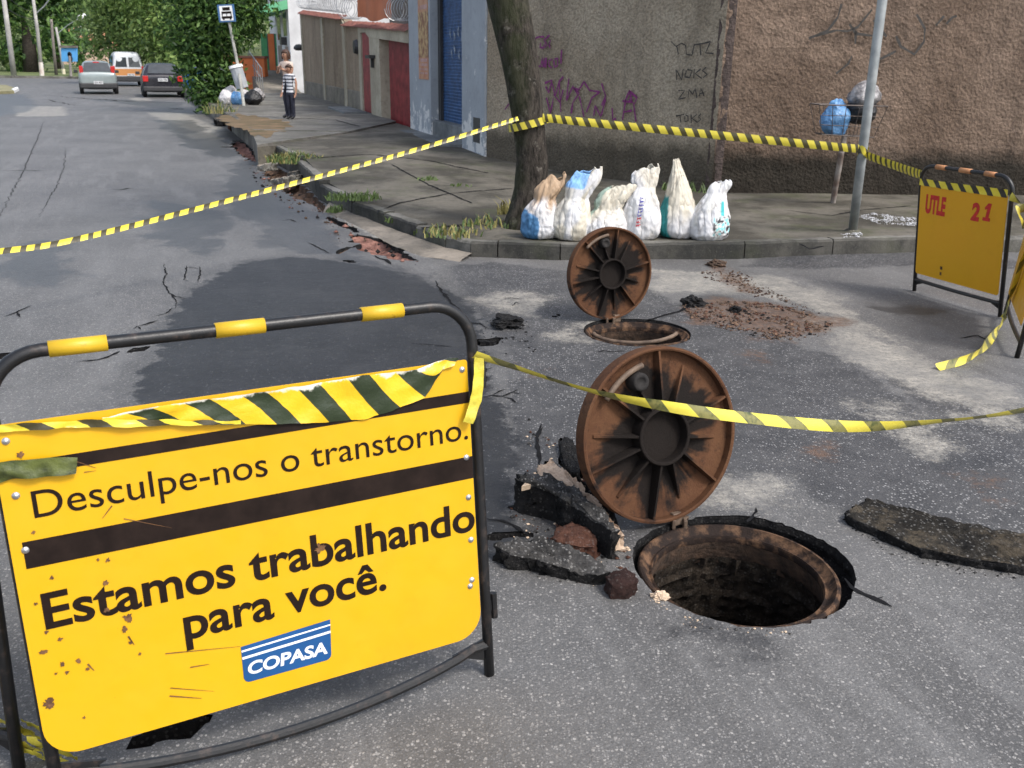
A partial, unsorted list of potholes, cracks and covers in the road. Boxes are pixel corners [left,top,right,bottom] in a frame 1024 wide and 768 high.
manhole cover [567,227,691,346]
pothole [326,217,359,242]
pothole [228,141,255,161]
pothole [262,168,325,212]
pothole [349,236,419,262]
pothole [536,463,621,530]
crack [436,281,489,329]
crack [133,265,202,329]
crack [1,130,41,213]
manhole cover [576,345,857,628]
